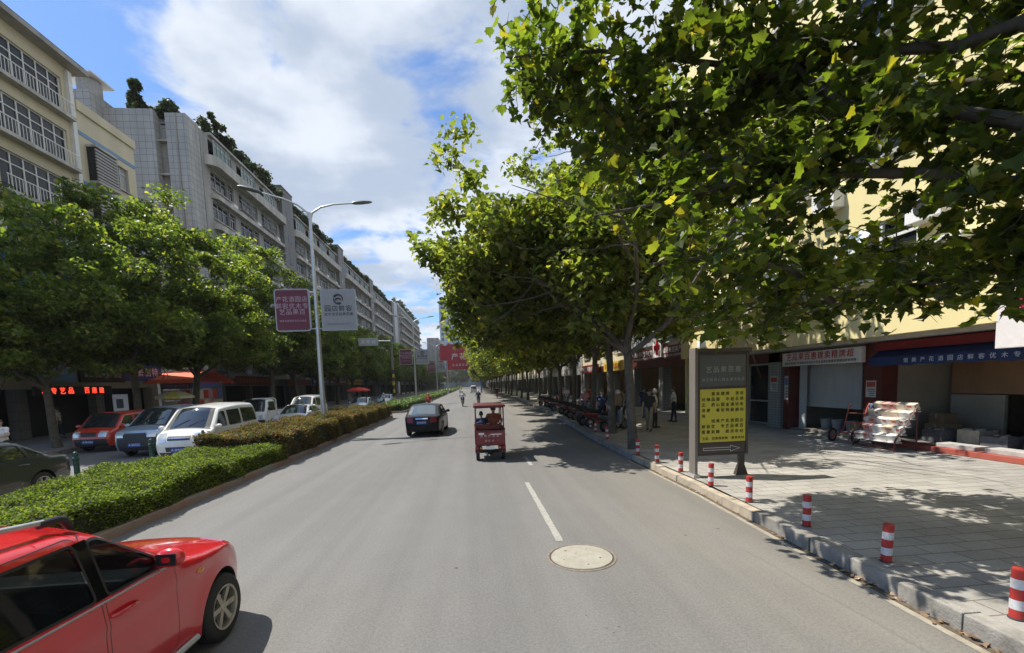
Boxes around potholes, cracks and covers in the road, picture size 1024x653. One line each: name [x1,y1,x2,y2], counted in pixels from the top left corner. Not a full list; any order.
manhole cover [547,544,617,572]
